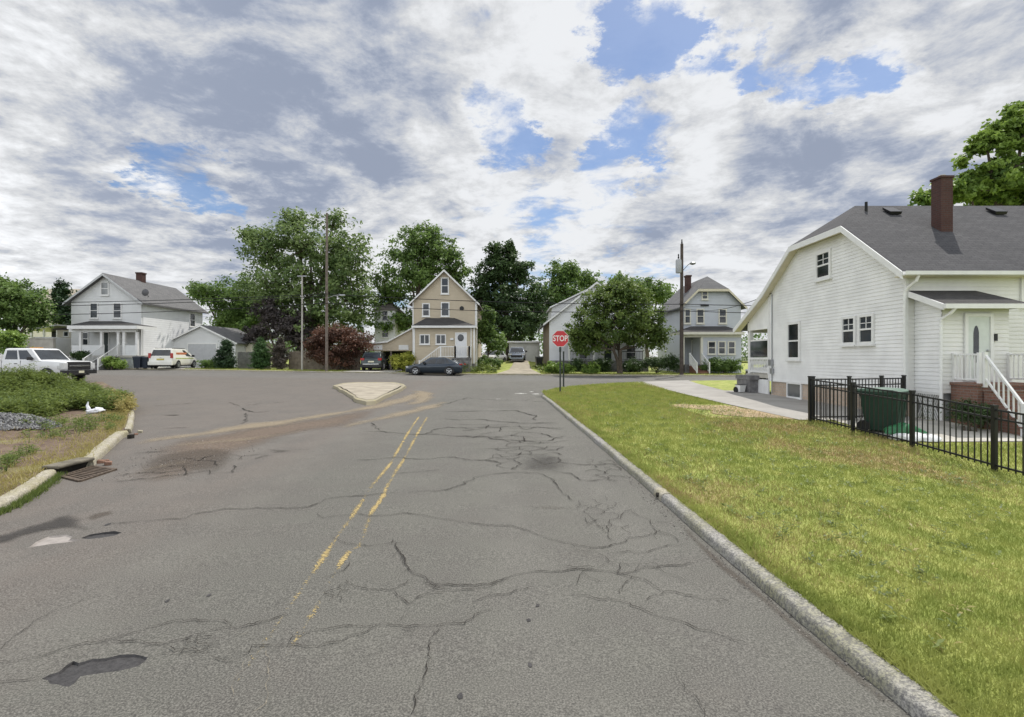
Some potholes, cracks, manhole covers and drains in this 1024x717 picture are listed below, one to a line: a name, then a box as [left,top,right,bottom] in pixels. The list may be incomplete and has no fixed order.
crack [2,398,745,717]
drain grate [41,457,117,482]
pothole [42,654,148,687]
pothole [82,531,122,539]
